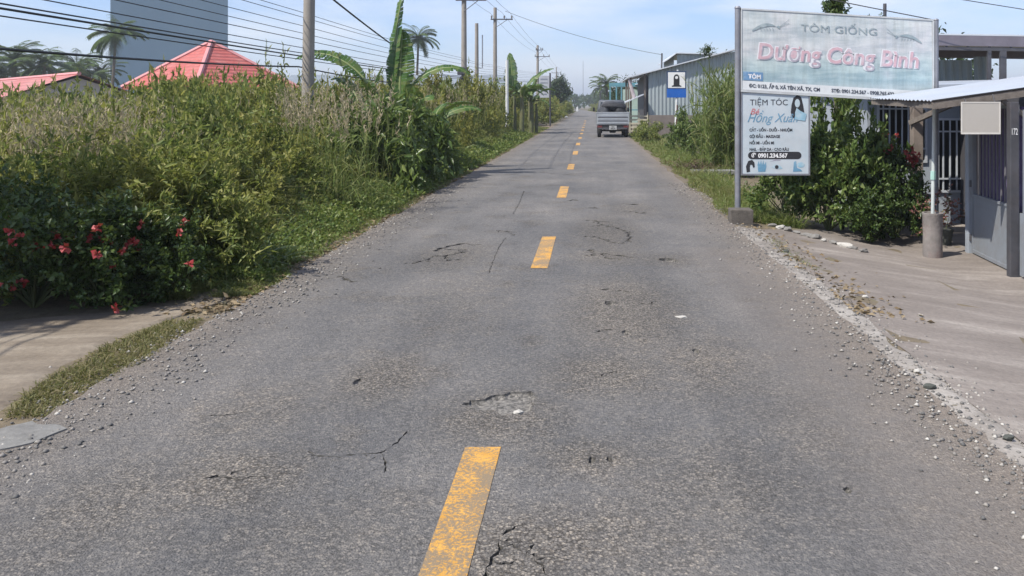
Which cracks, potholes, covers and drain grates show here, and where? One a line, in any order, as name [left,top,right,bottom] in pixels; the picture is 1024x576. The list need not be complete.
crack [302,431,407,472]
crack [568,199,638,260]
crack [482,525,568,576]
crack [405,230,516,273]
pothole [462,391,537,416]
